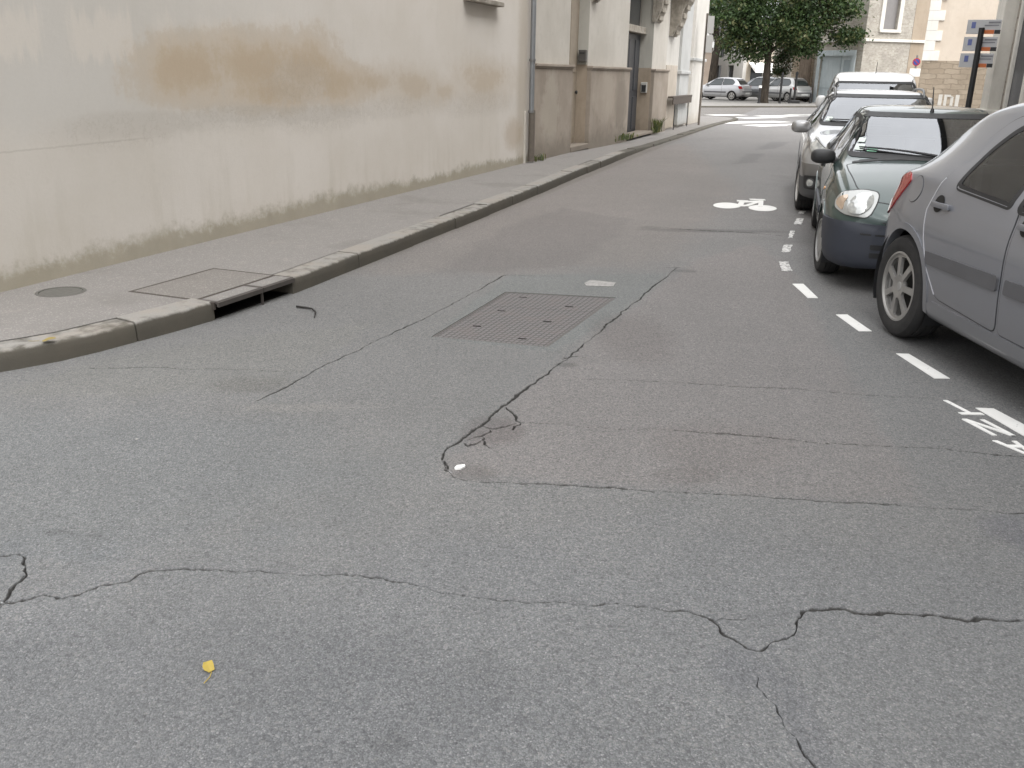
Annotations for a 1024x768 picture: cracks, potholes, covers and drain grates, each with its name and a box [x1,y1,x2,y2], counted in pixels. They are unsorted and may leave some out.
manhole cover [432,292,614,347]
drain grate [128,268,295,319]
manhole cover [35,286,86,297]
crack [0,553,1024,768]
crack [441,267,1024,514]
